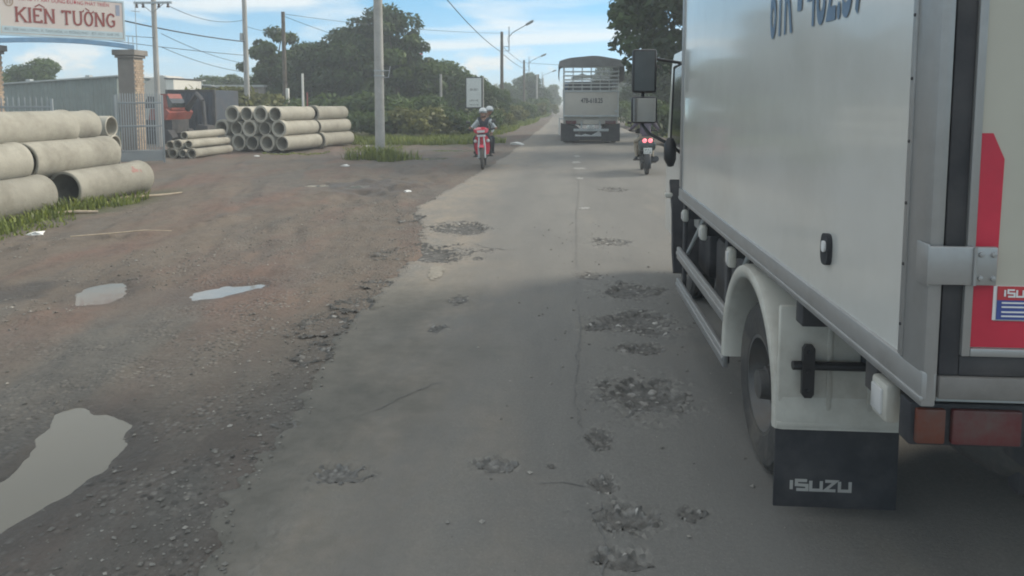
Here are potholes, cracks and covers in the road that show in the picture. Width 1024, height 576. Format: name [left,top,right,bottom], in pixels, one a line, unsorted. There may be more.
pothole [590,237,632,248]
pothole [617,343,667,356]
pothole [584,427,613,452]
pothole [308,462,377,485]
pothole [590,373,701,424]
pothole [589,309,684,338]
pothole [588,474,619,494]
pothole [584,322,611,332]
pothole [368,243,483,263]
pothole [598,280,669,301]
pothole [476,457,519,473]
pothole [588,501,663,538]
